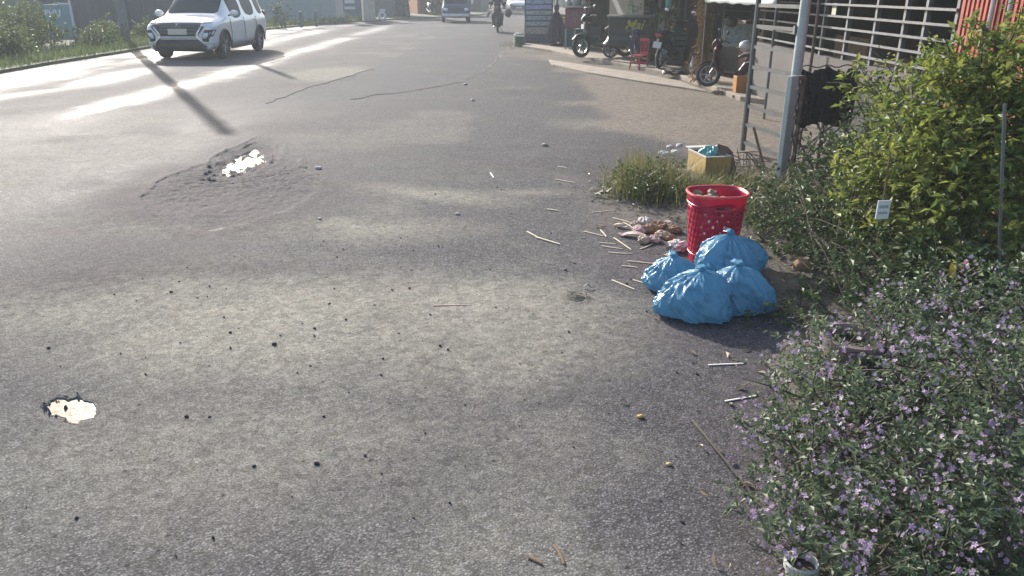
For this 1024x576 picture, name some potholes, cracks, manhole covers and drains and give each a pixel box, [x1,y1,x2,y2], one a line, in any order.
crack [266,49,506,104]
pothole [126,133,333,240]
pothole [40,392,99,425]
